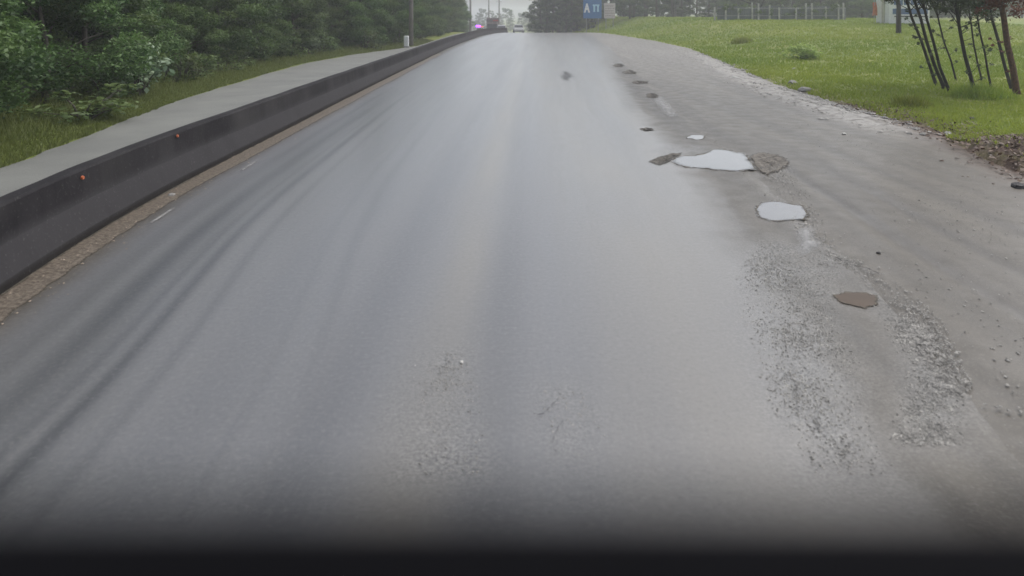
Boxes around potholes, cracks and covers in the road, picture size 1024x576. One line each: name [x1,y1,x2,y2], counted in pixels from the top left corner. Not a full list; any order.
pothole [755,201,809,221]
pothole [833,291,878,308]
pothole [672,149,756,171]
